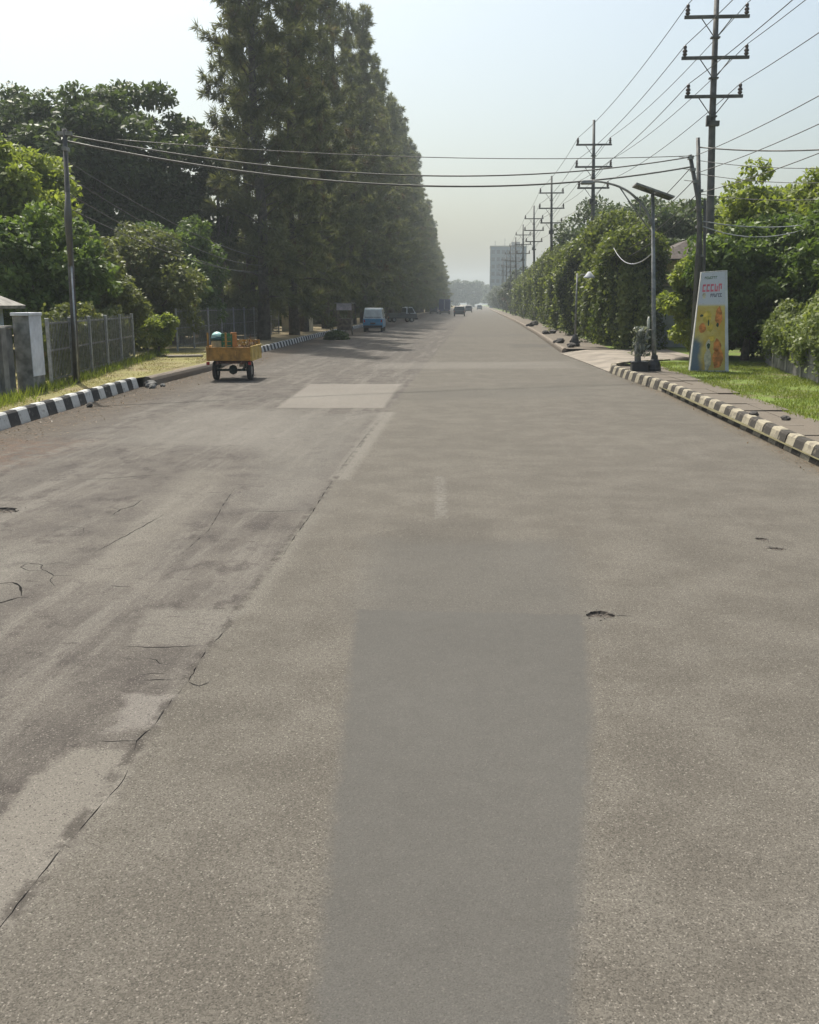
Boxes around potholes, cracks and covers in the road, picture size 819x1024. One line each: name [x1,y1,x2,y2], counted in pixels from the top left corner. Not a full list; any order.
pothole [584,609,619,621]
crack [102,501,161,549]
crack [0,562,70,603]
crack [131,646,187,680]
